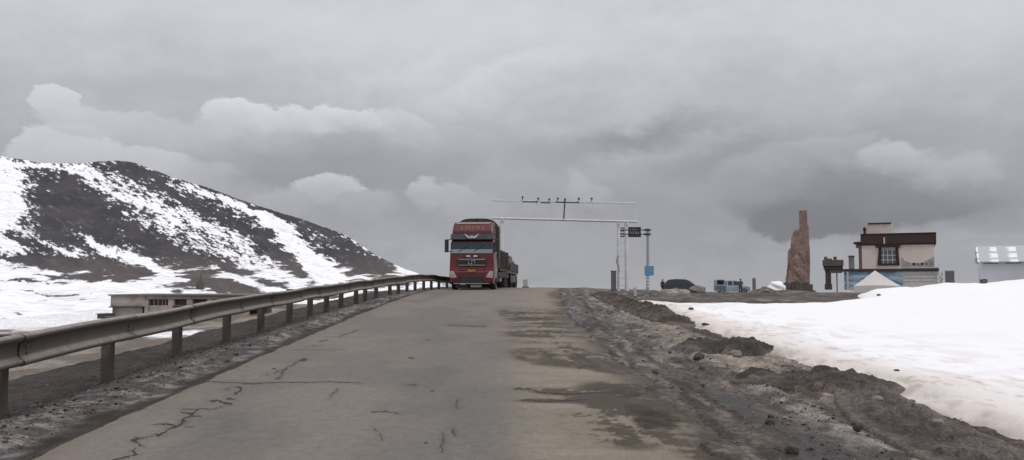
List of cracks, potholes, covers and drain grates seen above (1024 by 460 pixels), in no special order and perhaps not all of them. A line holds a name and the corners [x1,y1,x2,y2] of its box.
crack [112,360,359,460]
